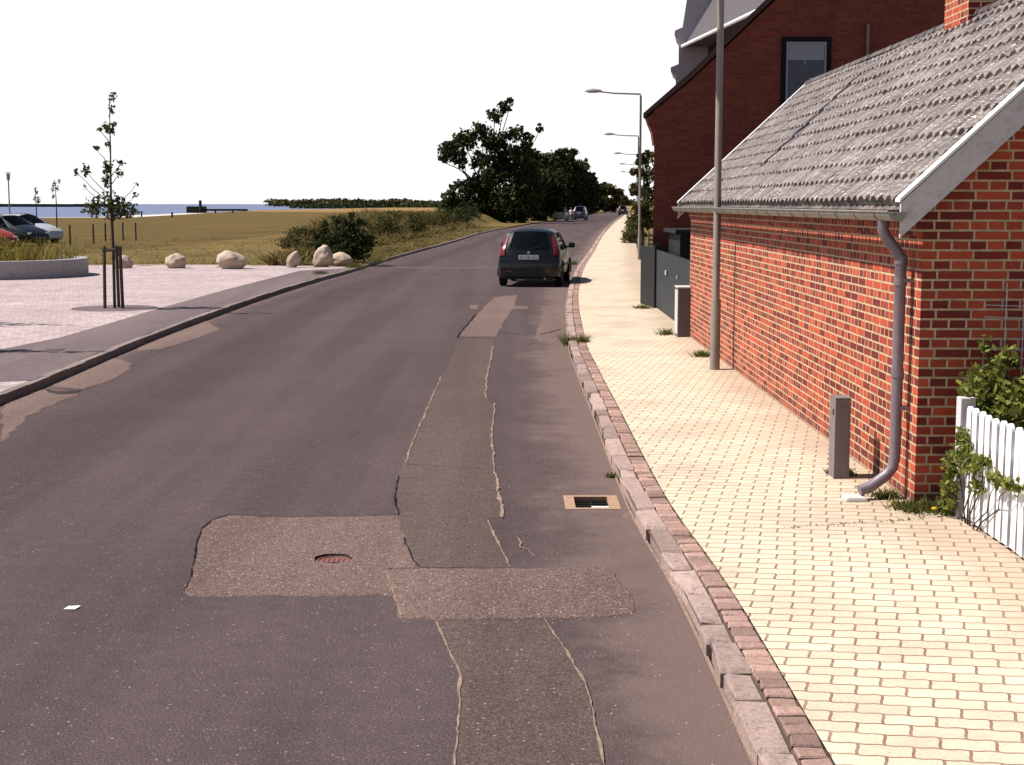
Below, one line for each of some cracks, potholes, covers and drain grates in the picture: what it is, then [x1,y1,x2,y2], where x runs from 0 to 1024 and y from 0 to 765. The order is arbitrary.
drain grate [563,495,621,510]
crack [484,332,534,566]
manhole cover [315,553,352,563]
